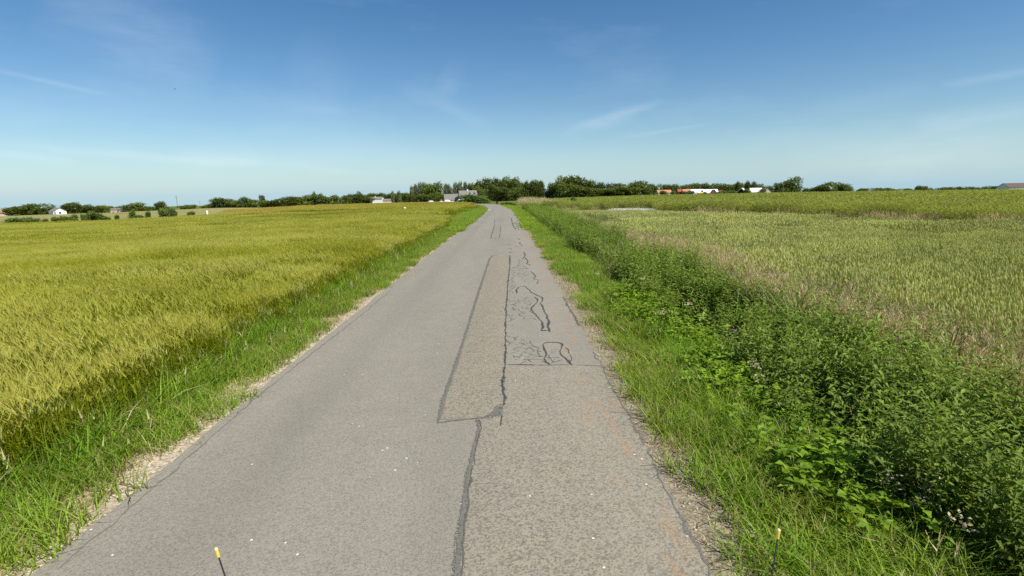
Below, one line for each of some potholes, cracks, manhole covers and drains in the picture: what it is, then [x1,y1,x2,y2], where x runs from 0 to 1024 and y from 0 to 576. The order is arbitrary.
crack [494,218,712,576]
